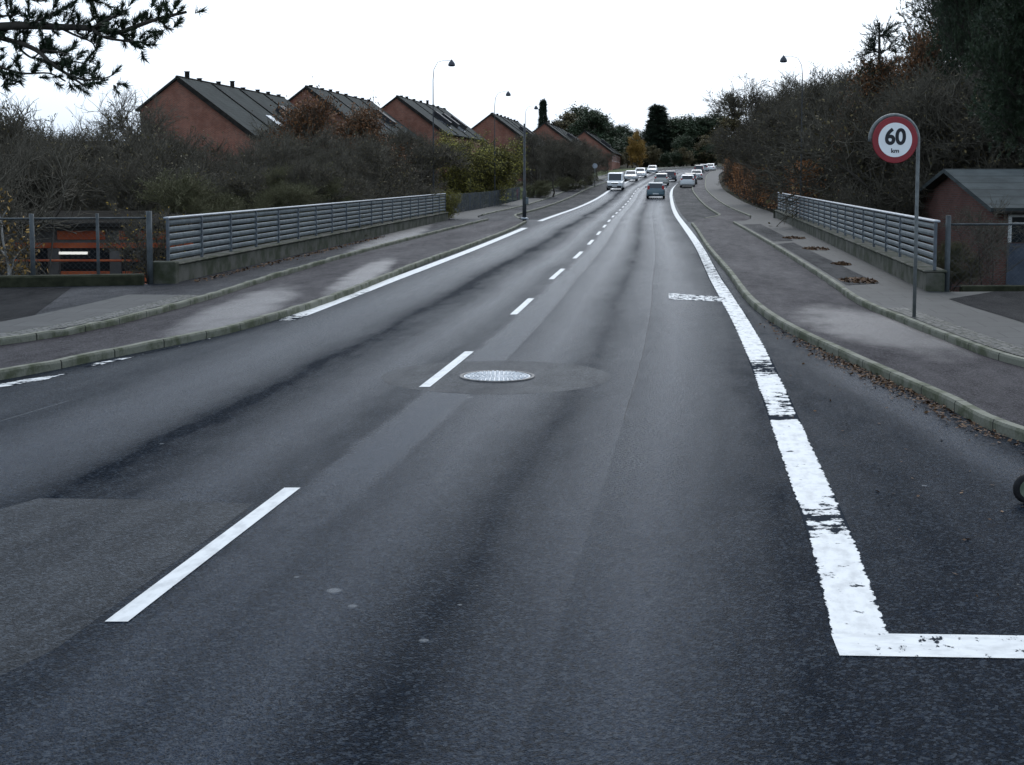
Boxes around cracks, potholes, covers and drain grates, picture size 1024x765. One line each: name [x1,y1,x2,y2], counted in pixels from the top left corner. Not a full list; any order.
manhole cover [459,370,535,382]
